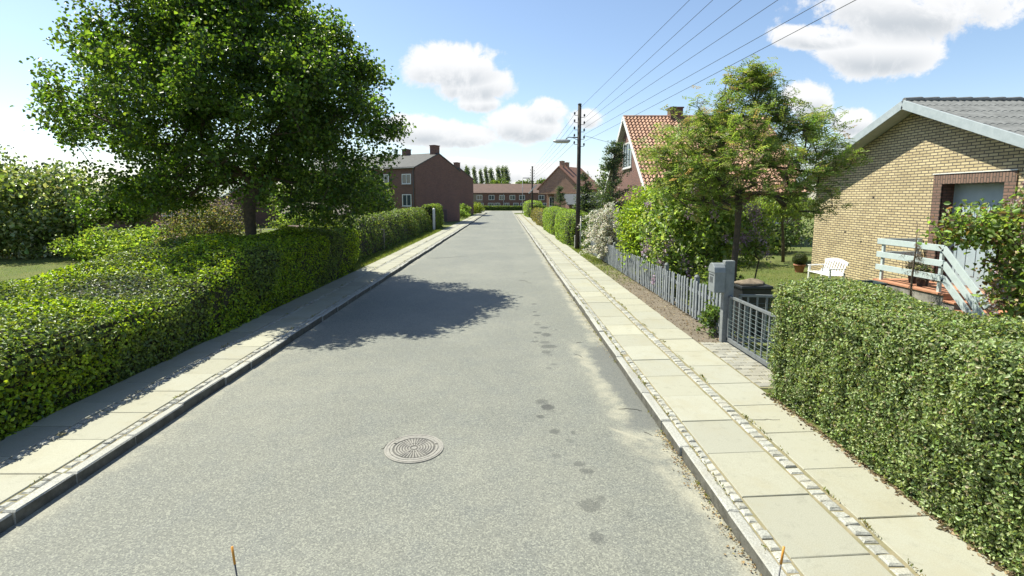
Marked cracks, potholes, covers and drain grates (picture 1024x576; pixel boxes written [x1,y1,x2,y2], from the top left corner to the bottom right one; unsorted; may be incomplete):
manhole cover [384,434,444,464]
